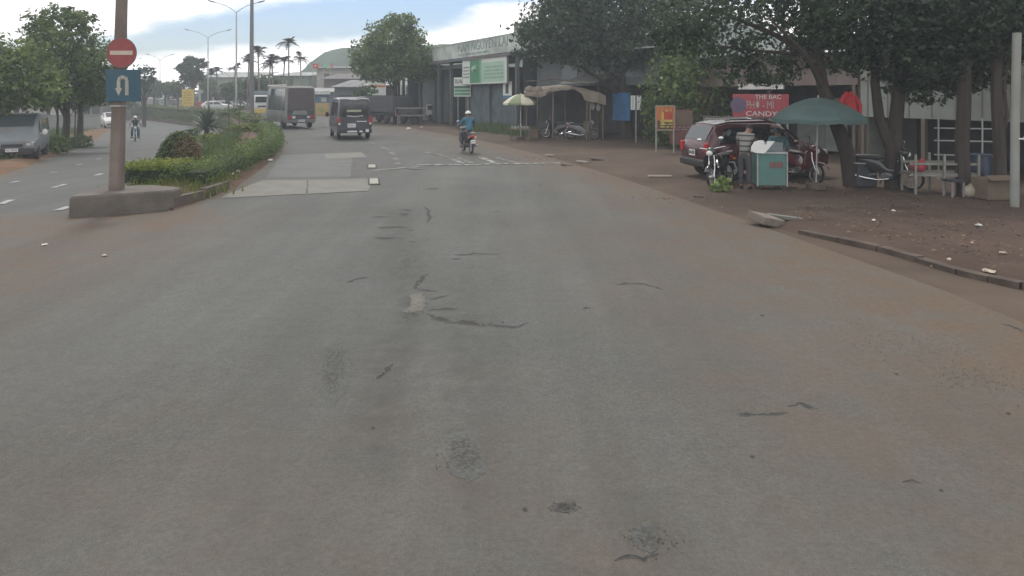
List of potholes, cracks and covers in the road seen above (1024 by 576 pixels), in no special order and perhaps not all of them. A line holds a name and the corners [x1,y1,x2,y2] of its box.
pothole [555,502,576,512]
crack [452,252,494,269]
crack [744,402,818,416]
crack [412,272,529,329]
crack [615,282,663,290]
crack [371,188,440,243]
crack [374,363,393,381]
